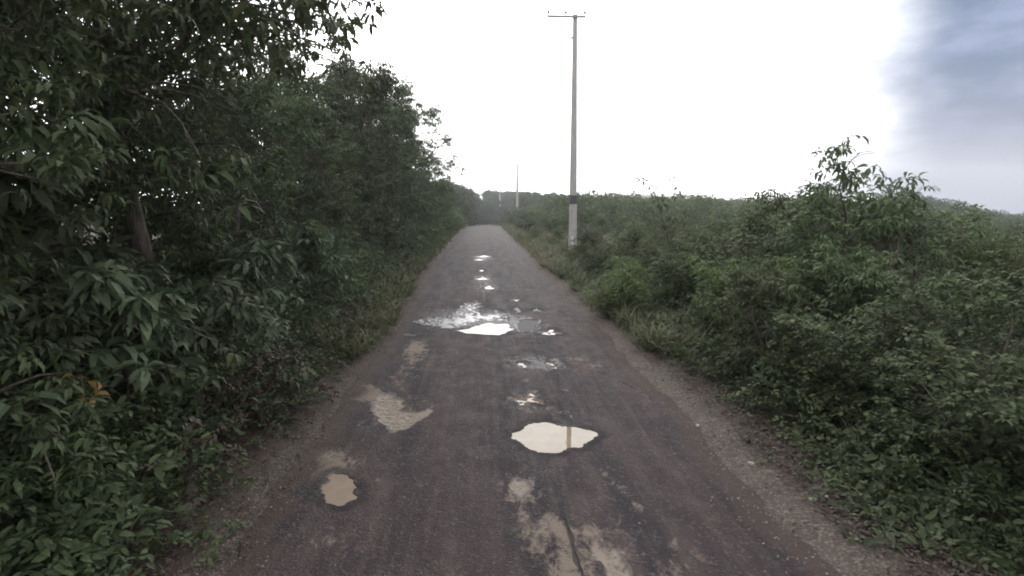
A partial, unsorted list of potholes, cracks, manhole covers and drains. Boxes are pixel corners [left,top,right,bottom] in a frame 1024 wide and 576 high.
pothole [514,319,541,332]
pothole [511,421,599,453]
pothole [319,471,358,506]
pothole [456,322,514,335]
pothole [413,301,512,328]
pothole [507,389,547,405]
crack [562,515,585,576]
